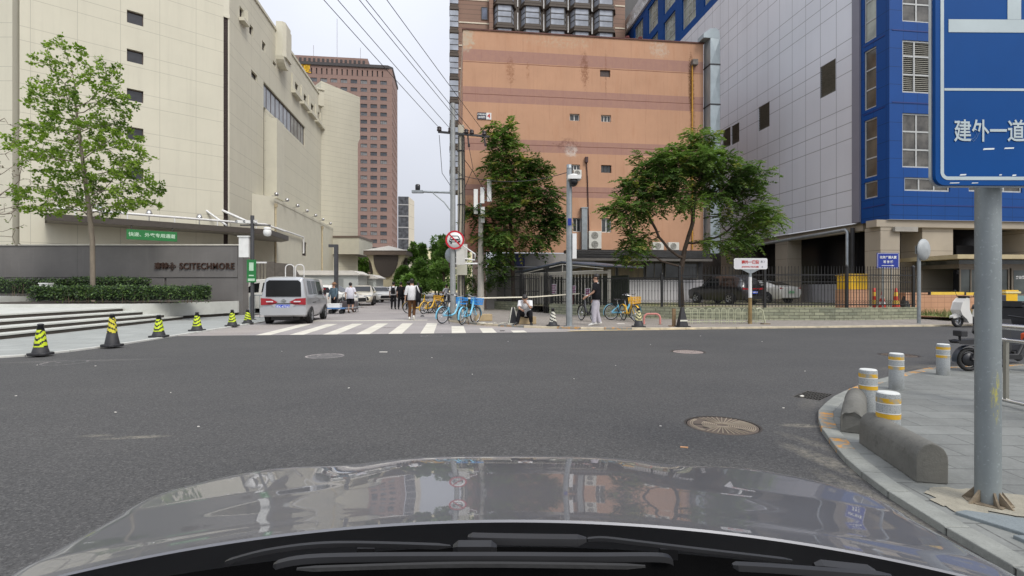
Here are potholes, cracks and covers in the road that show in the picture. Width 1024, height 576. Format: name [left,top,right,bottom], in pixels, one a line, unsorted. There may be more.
manhole cover [684,416,763,436]
drain grate [791,391,834,401]
